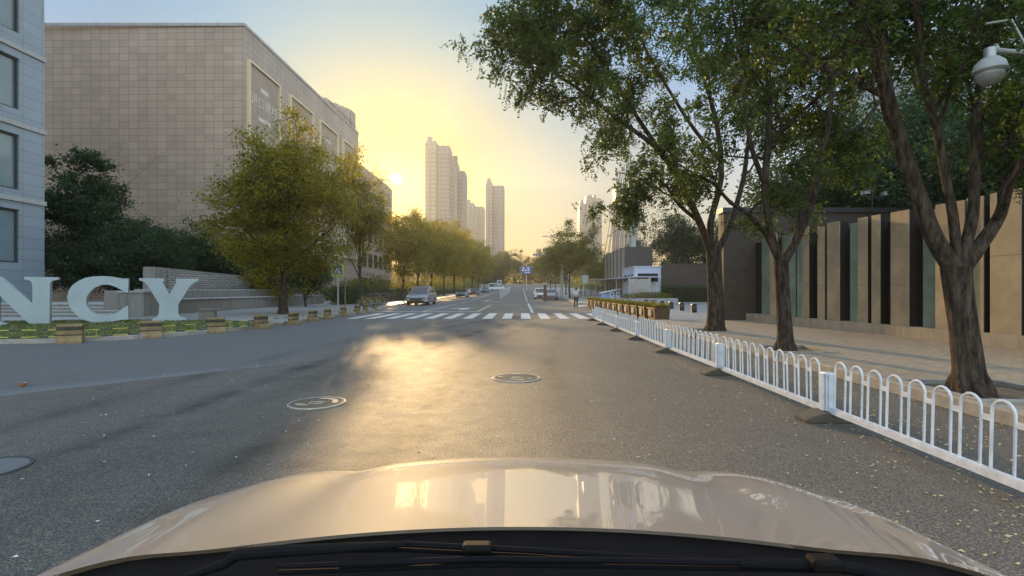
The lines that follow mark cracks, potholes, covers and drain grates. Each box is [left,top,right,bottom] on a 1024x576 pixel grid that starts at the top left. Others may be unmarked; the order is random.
manhole cover [0,456,35,476]
manhole cover [287,397,346,410]
manhole cover [492,373,541,383]
